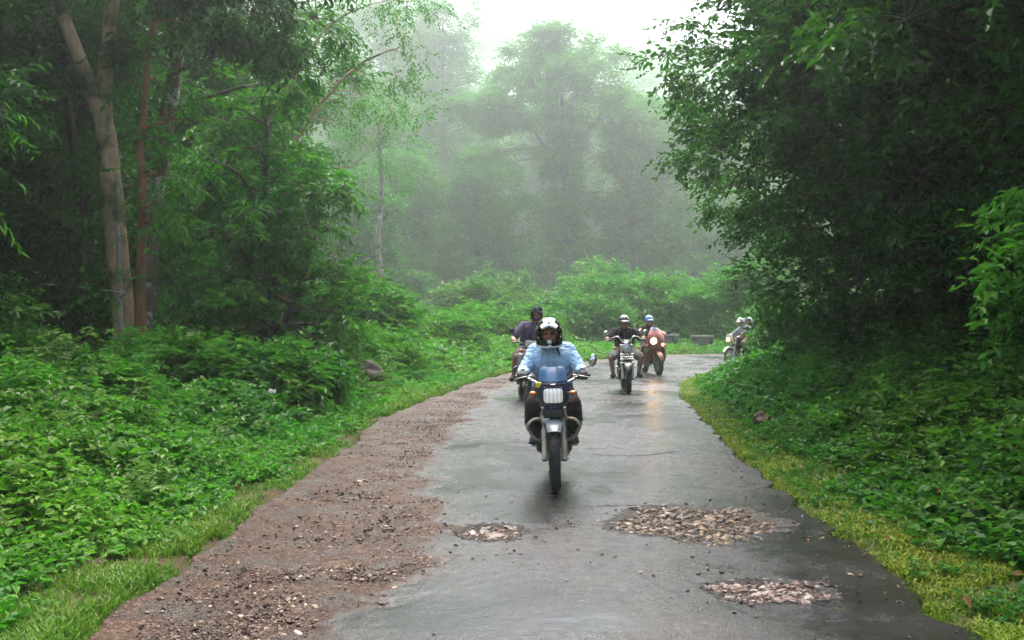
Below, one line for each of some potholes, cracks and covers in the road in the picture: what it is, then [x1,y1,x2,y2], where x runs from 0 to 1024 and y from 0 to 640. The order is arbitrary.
pothole [697,577,844,607]
pothole [593,501,801,548]
pothole [451,521,533,542]
